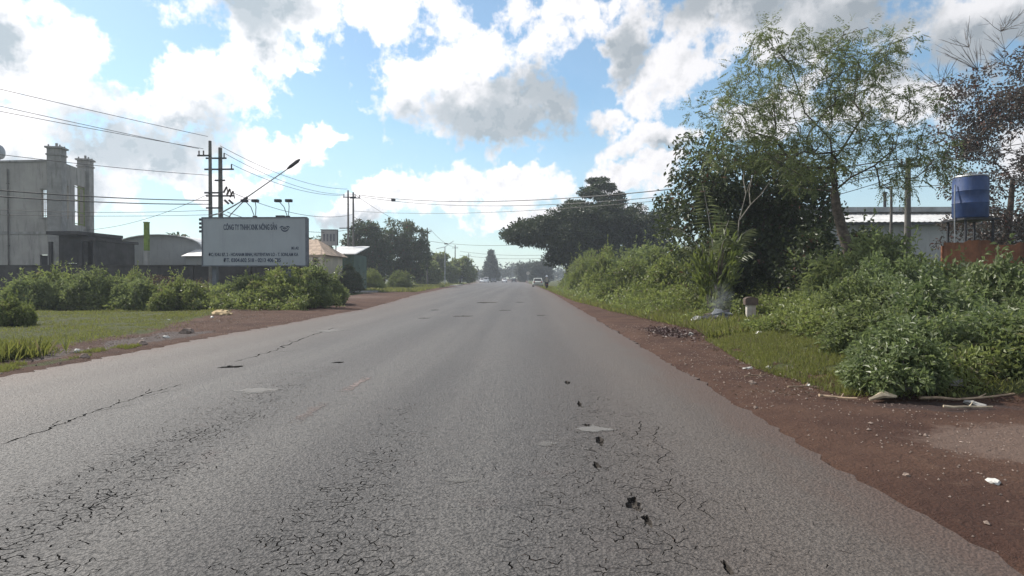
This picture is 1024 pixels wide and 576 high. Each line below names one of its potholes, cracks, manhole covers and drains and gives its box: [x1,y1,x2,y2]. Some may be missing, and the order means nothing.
crack [517,394,746,576]
crack [0,369,315,576]
pothole [625,496,642,511]
crack [235,403,430,576]
